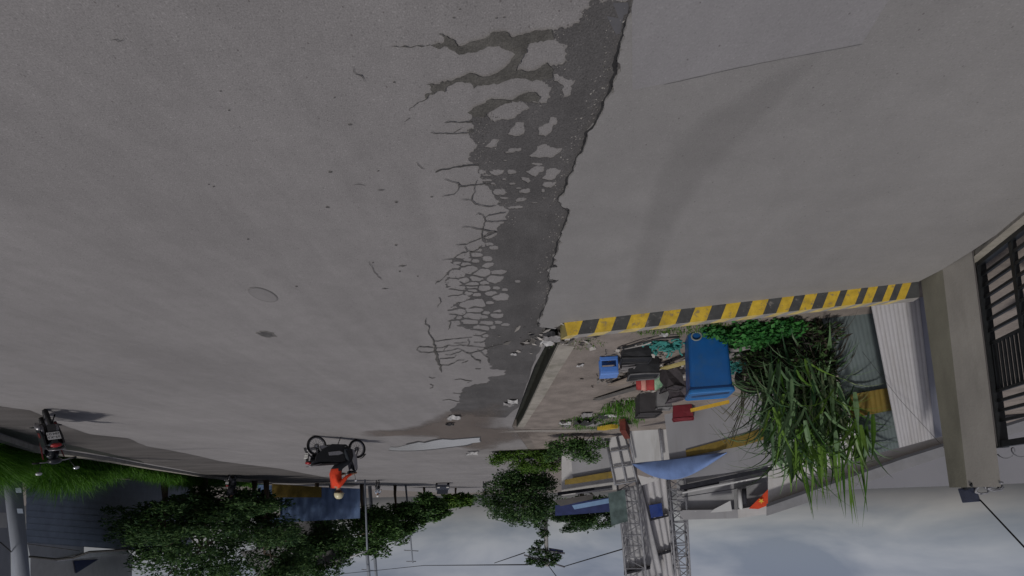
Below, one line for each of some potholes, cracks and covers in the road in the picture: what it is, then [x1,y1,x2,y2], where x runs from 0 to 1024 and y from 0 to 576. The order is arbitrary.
manhole cover [248,287,278,302]
crack [392,8,629,326]
crack [417,163,506,402]
